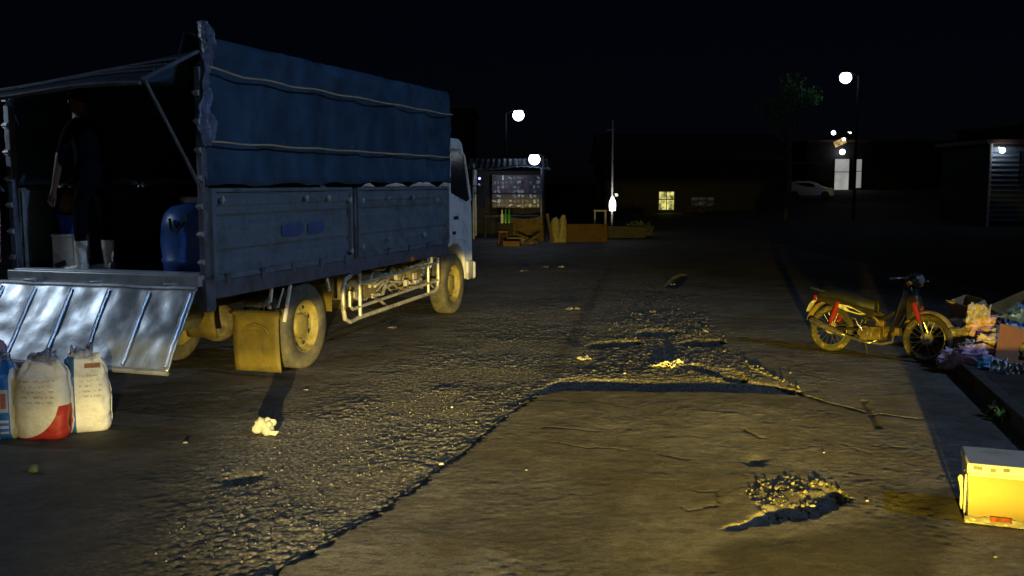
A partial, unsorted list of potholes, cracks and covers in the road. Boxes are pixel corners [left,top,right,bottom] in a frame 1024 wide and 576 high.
pothole [676,338,728,348]
crack [271,377,921,576]
pothole [719,476,857,531]
pothole [634,328,681,337]
pothole [736,451,774,467]
pothole [678,362,751,384]
pothole [583,340,643,349]
